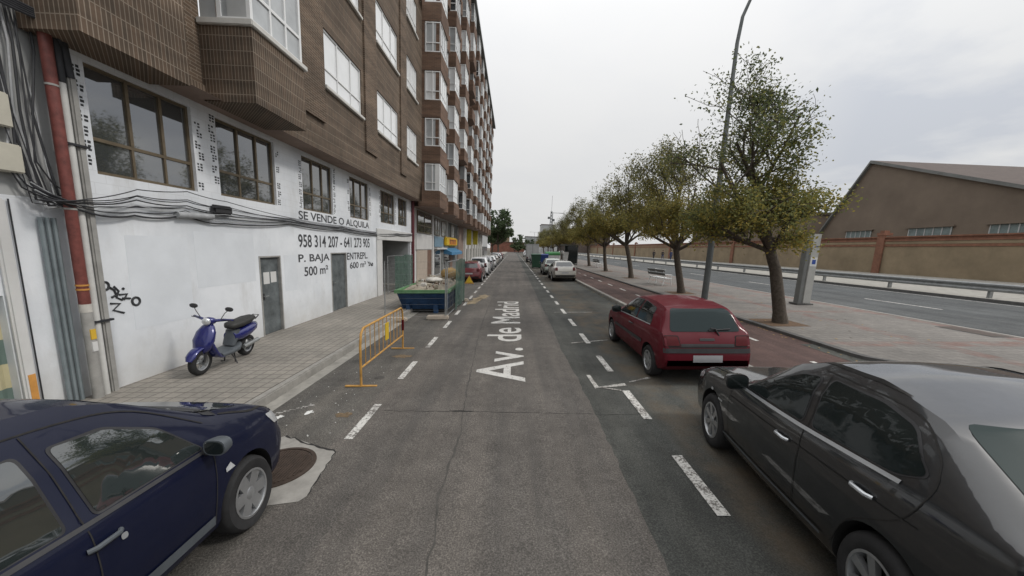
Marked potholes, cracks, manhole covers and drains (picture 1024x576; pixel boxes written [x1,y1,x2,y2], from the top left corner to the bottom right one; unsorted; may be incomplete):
crack [395,294,589,576]
manhole cover [272,447,317,488]
